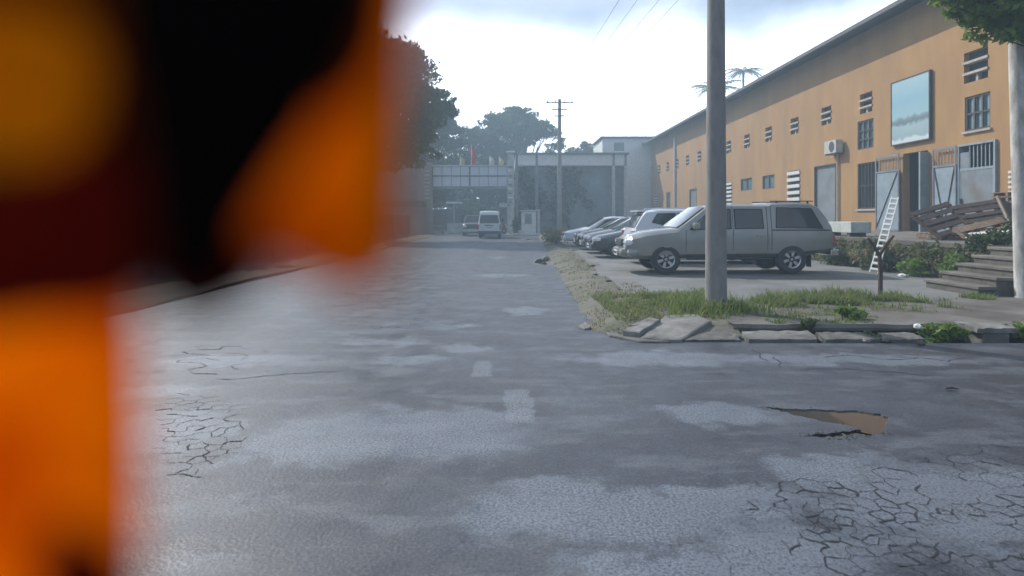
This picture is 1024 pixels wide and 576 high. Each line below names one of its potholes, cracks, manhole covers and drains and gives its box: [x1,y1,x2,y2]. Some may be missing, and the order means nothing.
pothole [760,405,893,440]
crack [158,393,245,477]
crack [172,346,342,379]
crack [753,350,954,376]
crack [730,435,1024,576]
